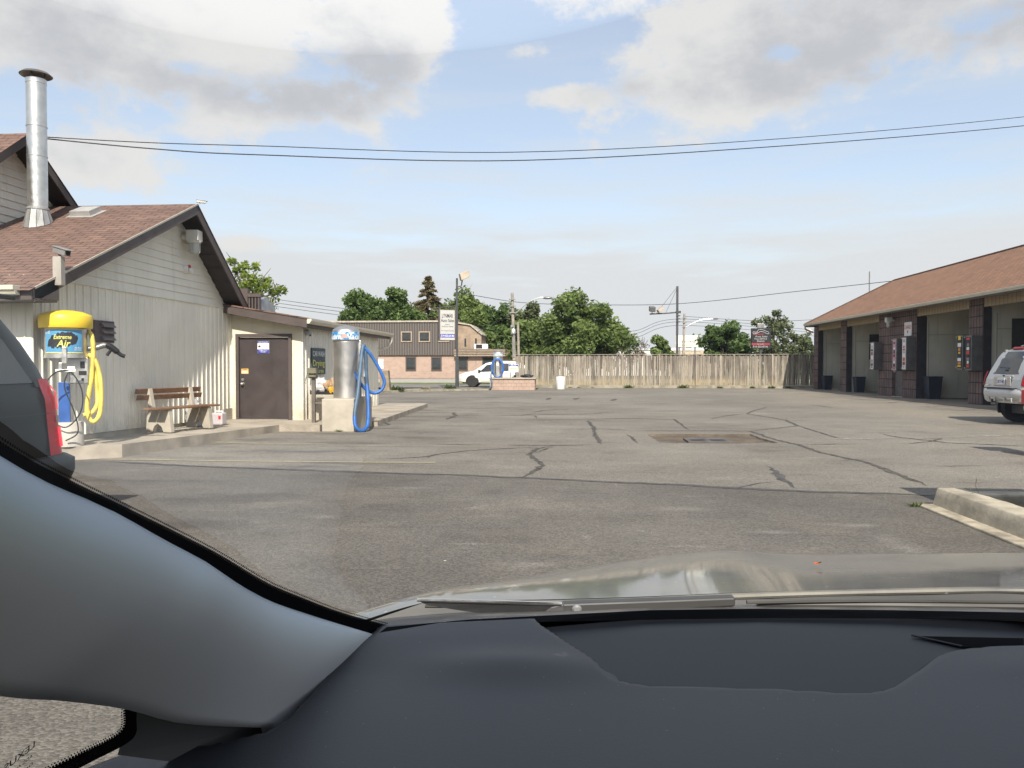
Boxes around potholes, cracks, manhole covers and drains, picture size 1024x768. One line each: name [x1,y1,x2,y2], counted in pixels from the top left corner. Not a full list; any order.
crack [661,398,1014,488]
crack [497,398,643,444]
crack [375,443,551,477]
